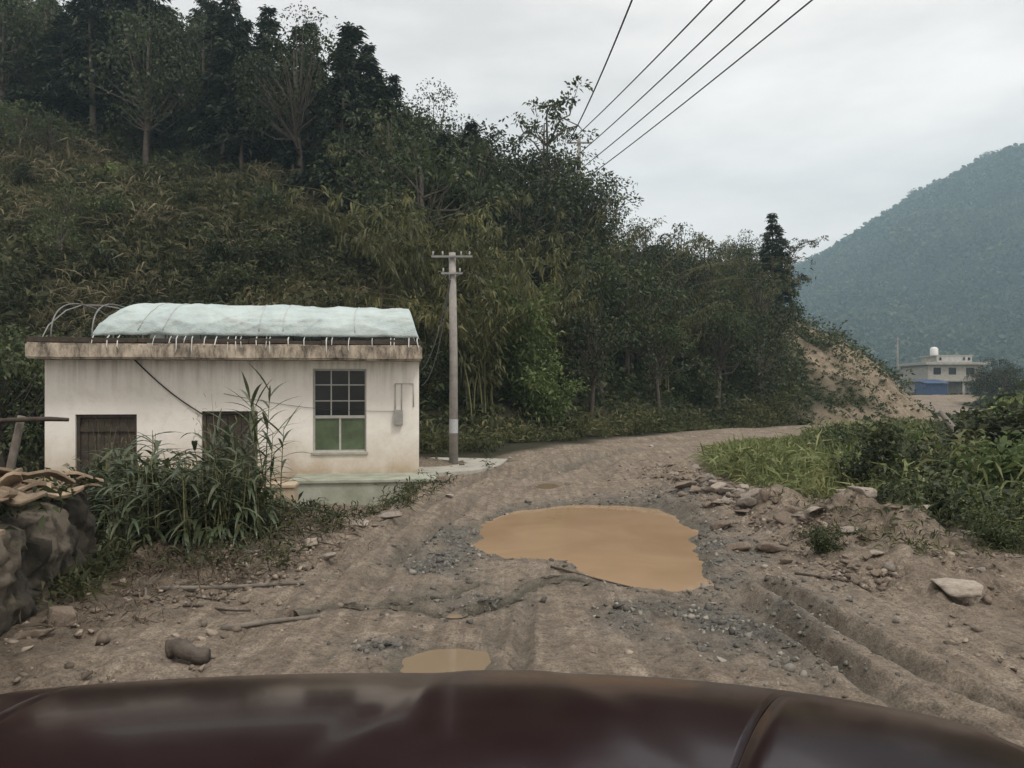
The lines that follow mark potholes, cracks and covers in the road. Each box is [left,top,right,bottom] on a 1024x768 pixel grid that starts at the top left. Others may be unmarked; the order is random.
pothole [365,641,513,673]
pothole [525,481,579,490]
pothole [451,497,743,598]
